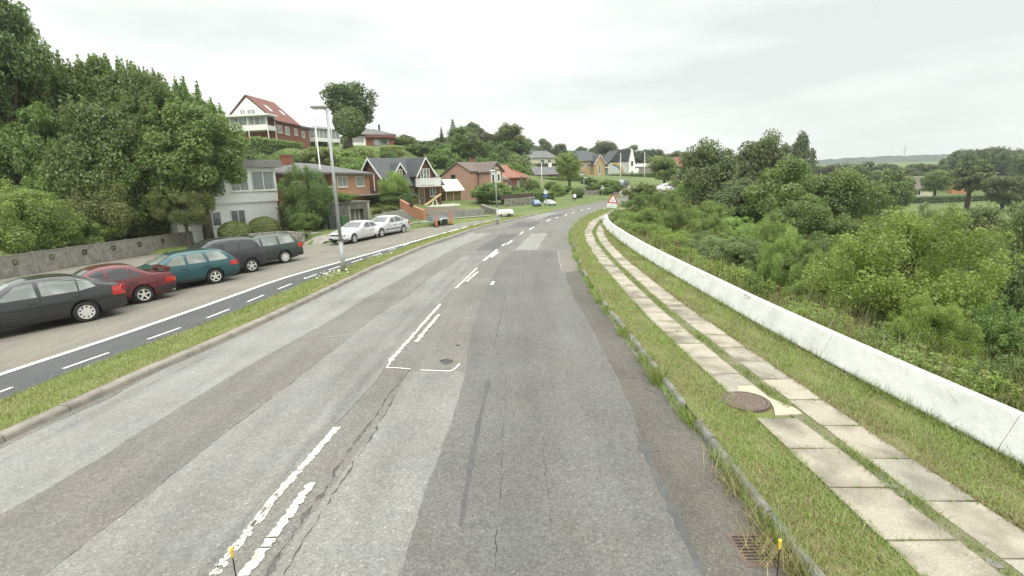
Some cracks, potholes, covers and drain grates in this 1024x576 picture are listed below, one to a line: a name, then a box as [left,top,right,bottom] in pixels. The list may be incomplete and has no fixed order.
manhole cover [721,391,771,413]
crack [495,381,506,561]
crack [266,371,409,576]
drain grate [725,532,791,567]
